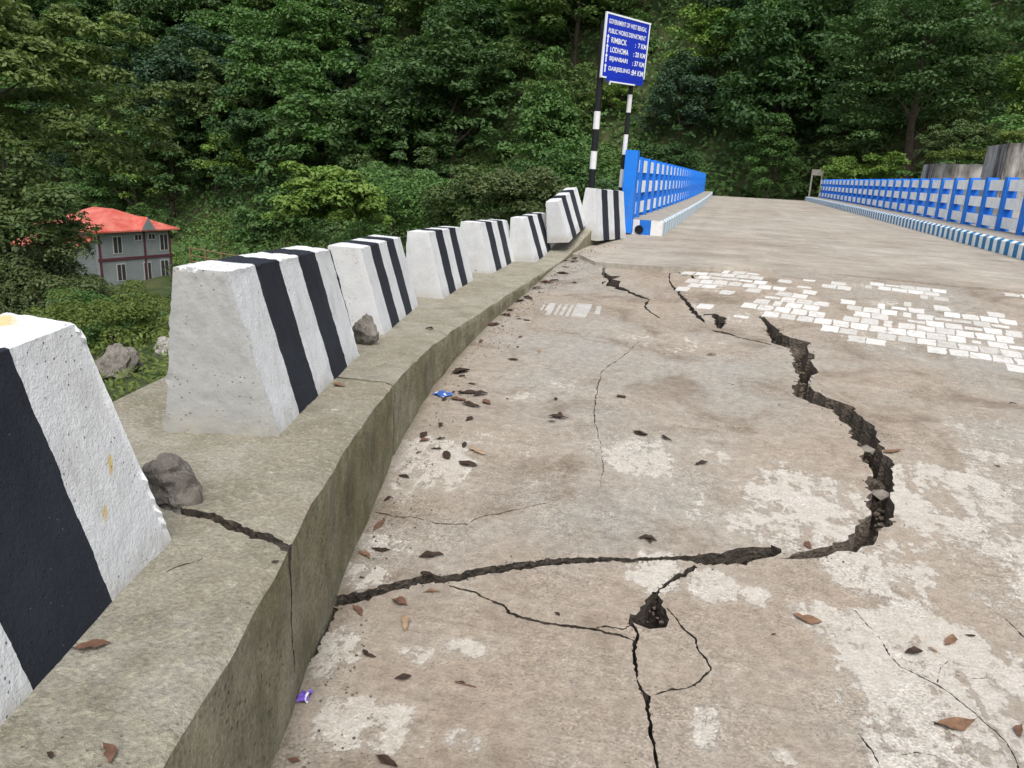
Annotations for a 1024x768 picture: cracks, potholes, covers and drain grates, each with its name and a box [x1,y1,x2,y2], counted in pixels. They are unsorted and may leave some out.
crack [855,610,1019,768]
crack [317,268,905,768]
